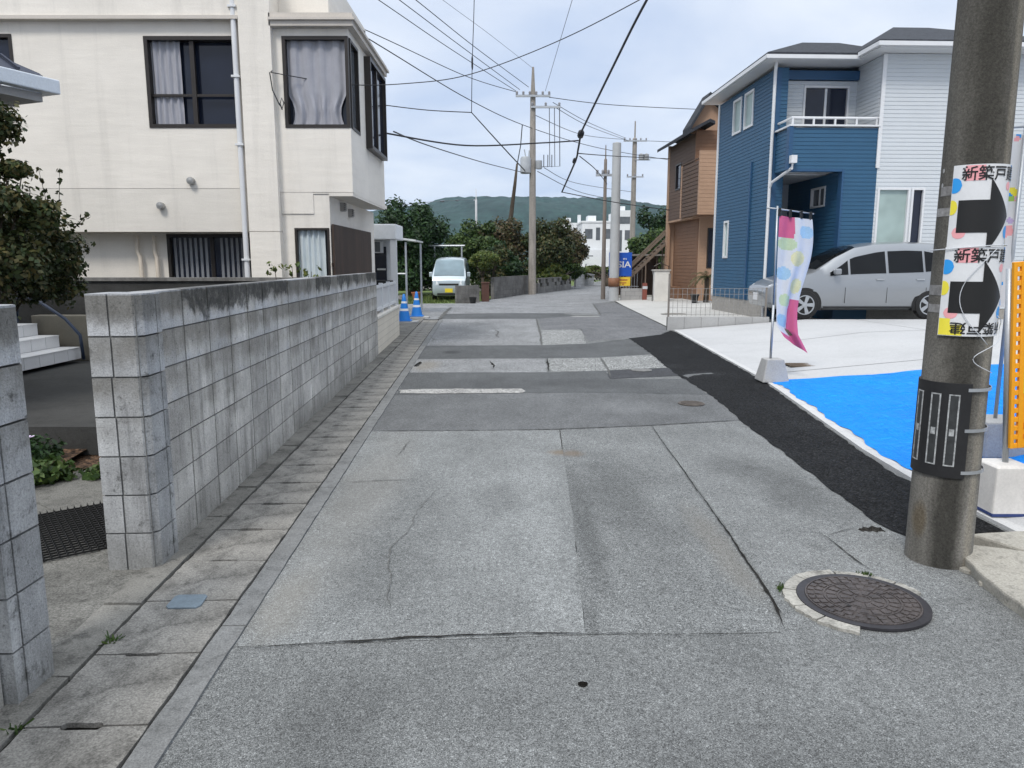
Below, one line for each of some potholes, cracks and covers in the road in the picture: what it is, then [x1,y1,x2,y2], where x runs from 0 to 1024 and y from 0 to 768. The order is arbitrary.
manhole cover [775,569,933,636]
crack [355,479,438,610]
